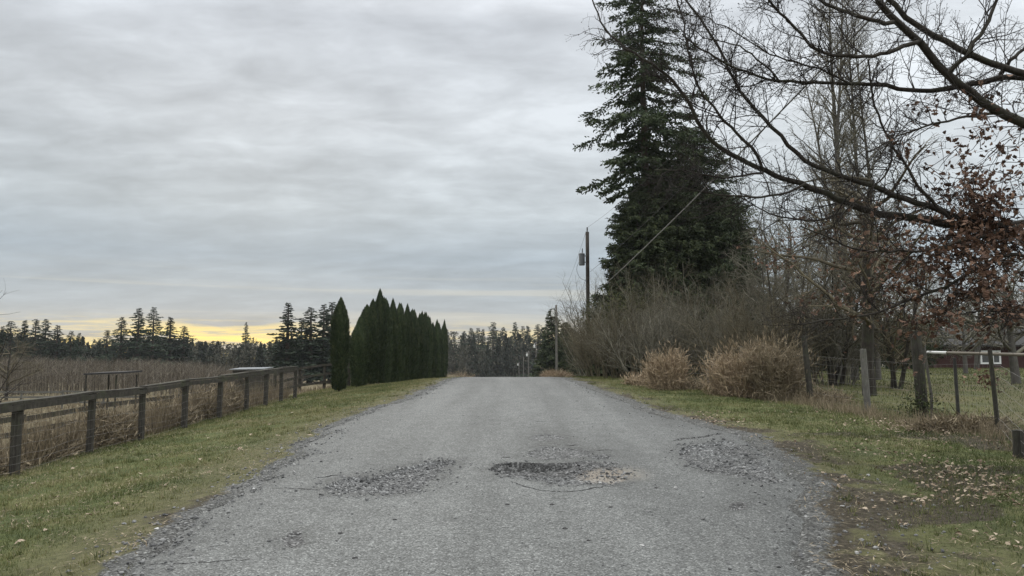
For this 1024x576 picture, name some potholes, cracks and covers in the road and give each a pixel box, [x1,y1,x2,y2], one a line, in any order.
pothole [656,438,790,489]
pothole [295,457,477,501]
pothole [477,457,648,487]
crack [674,433,723,441]
pothole [527,446,594,462]
crack [512,482,614,492]
